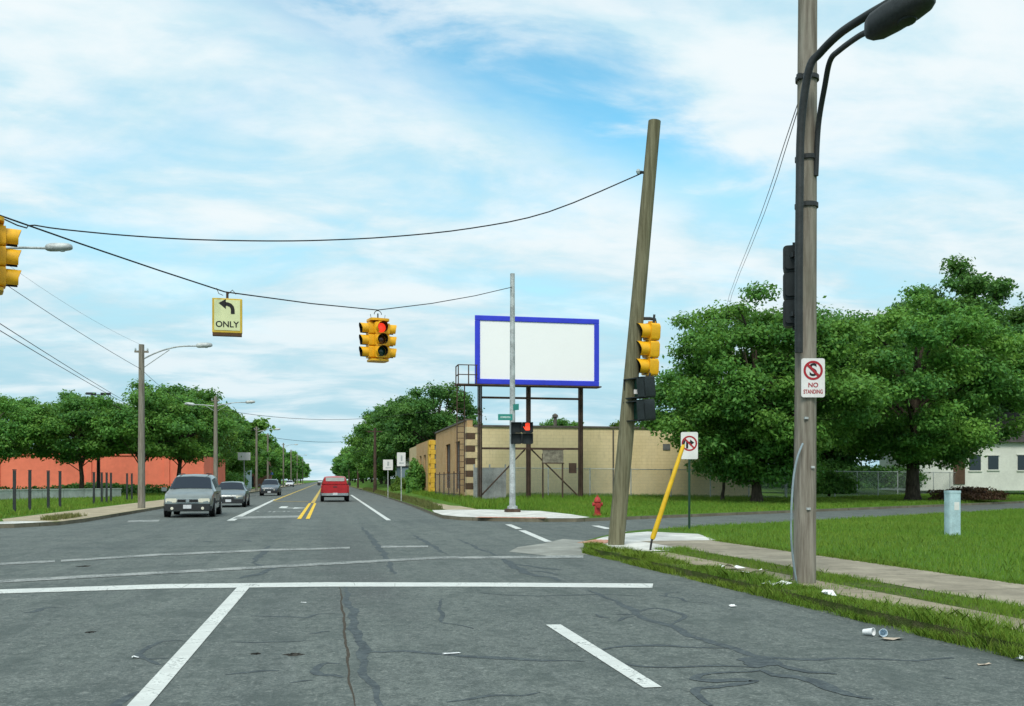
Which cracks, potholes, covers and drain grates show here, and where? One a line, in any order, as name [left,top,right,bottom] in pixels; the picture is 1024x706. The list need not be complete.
crack [339,587,355,706]
